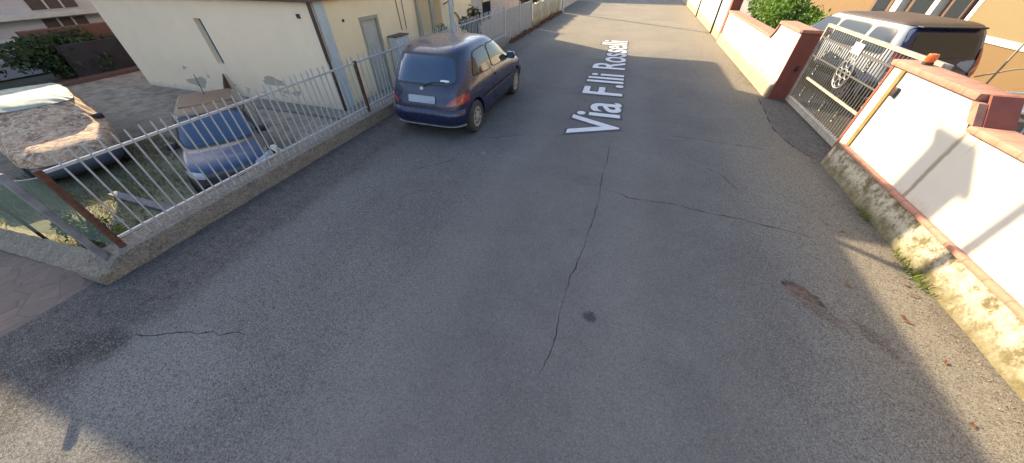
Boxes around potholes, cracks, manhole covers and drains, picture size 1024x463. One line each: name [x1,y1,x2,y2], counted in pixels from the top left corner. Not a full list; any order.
crack [619,193,811,238]
crack [537,148,610,392]
